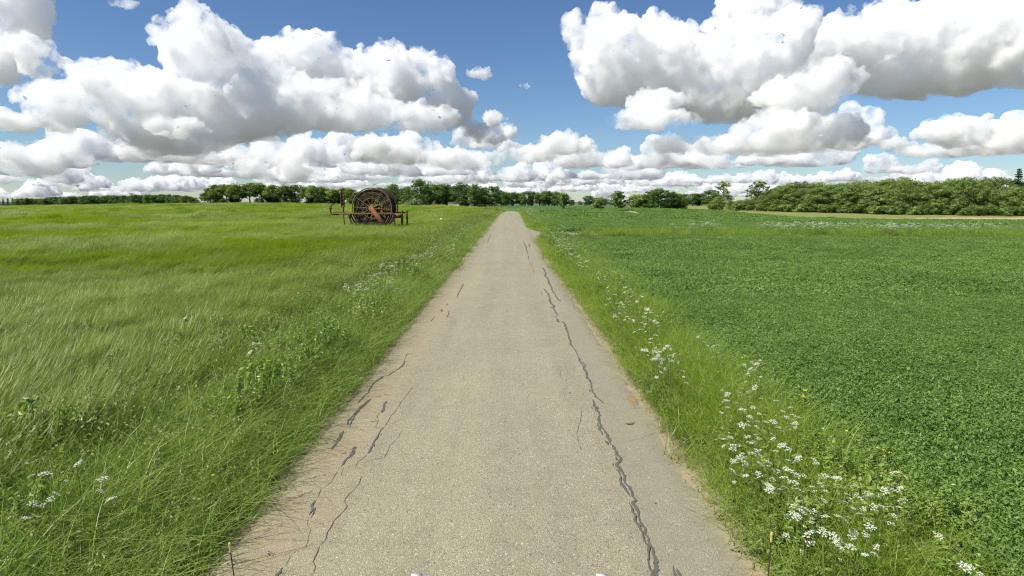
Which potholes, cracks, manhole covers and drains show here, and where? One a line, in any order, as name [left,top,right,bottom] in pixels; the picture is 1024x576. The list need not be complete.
crack [285,386,414,574]
